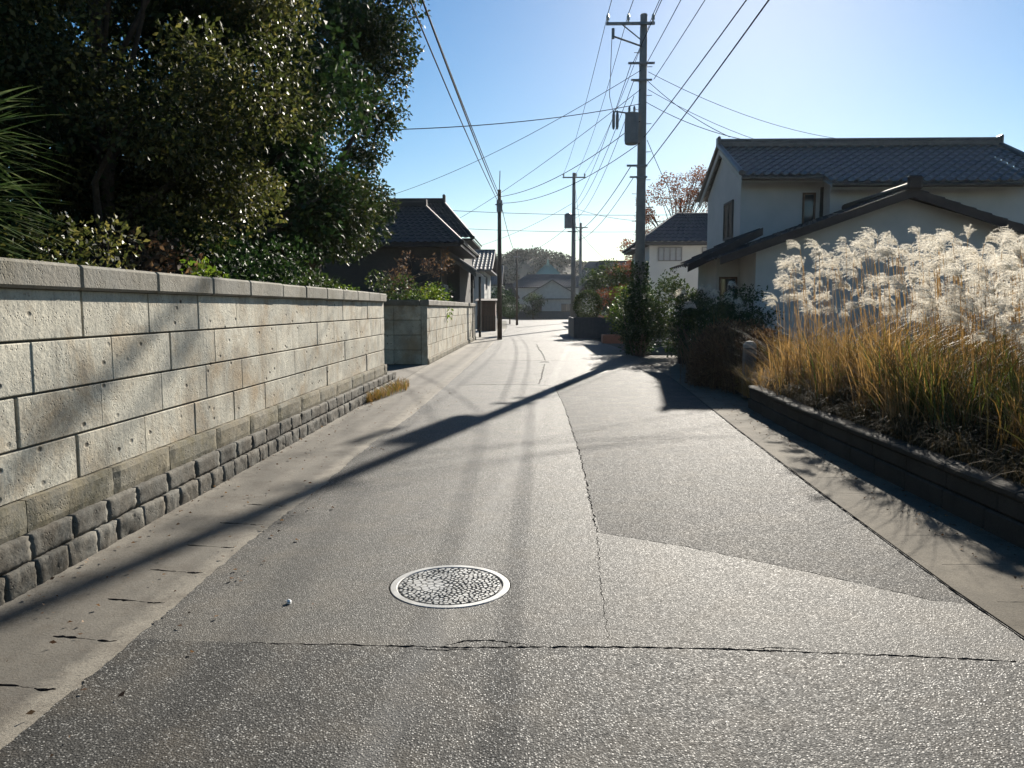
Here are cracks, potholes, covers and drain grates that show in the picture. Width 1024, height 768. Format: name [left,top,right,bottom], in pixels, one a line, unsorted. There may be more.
crack [252,344,1024,662]
manhole cover [390,565,510,609]
